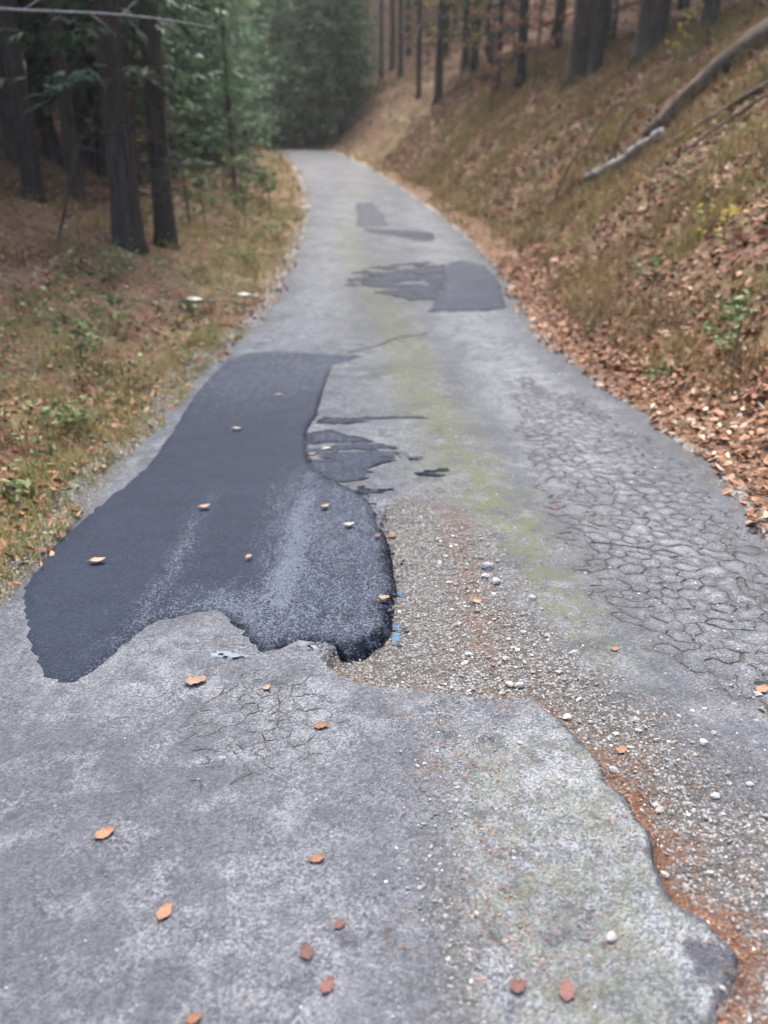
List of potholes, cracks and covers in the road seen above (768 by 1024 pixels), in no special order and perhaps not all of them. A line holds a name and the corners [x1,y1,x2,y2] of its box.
pothole [321,491,768,1024]
crack [349,333,428,353]
crack [183,669,355,792]
crack [512,377,768,714]
